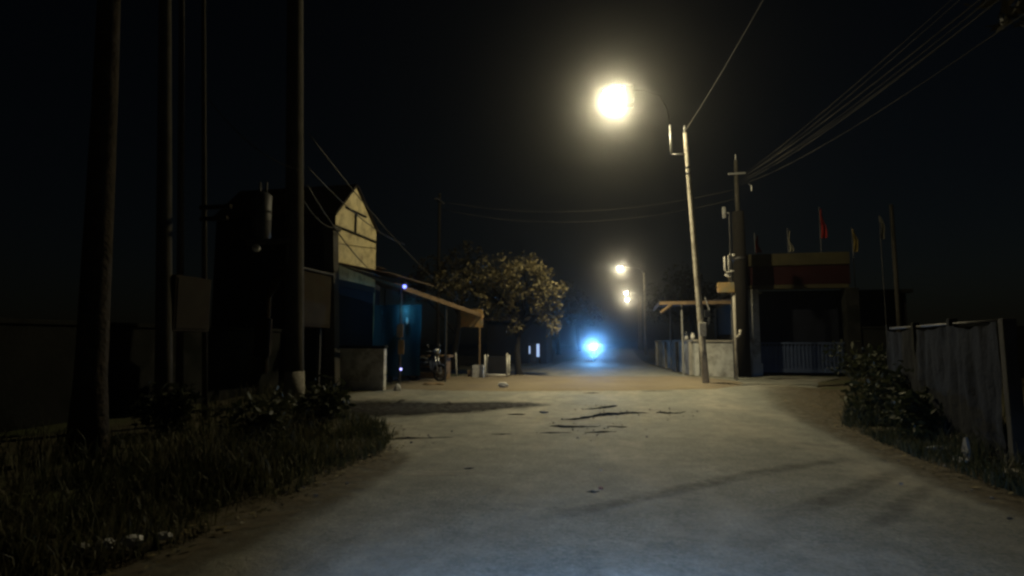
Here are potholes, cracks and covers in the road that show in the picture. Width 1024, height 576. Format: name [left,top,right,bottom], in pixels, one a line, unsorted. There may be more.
crack [544,392,685,433]
